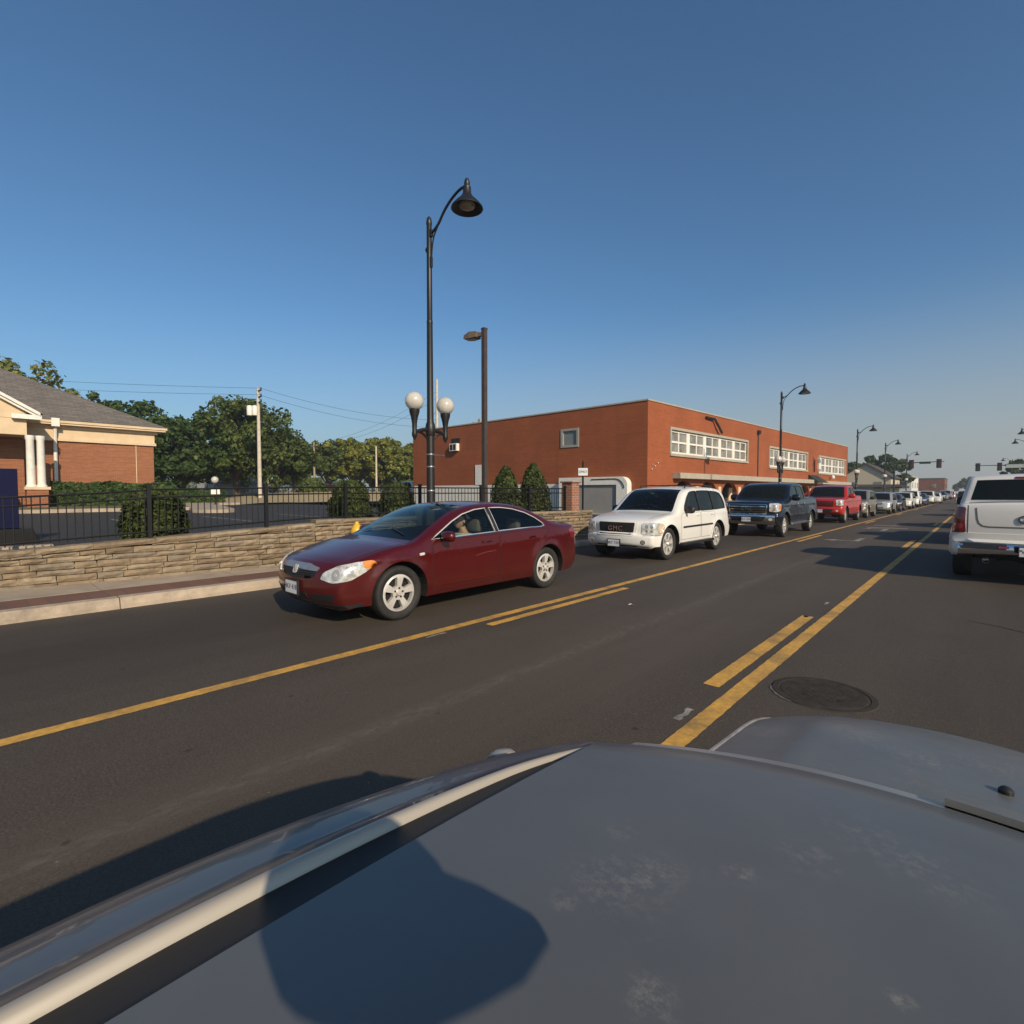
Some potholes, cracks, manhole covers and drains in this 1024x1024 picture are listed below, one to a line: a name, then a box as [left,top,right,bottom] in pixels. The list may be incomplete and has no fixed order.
manhole cover [770,677,880,714]
